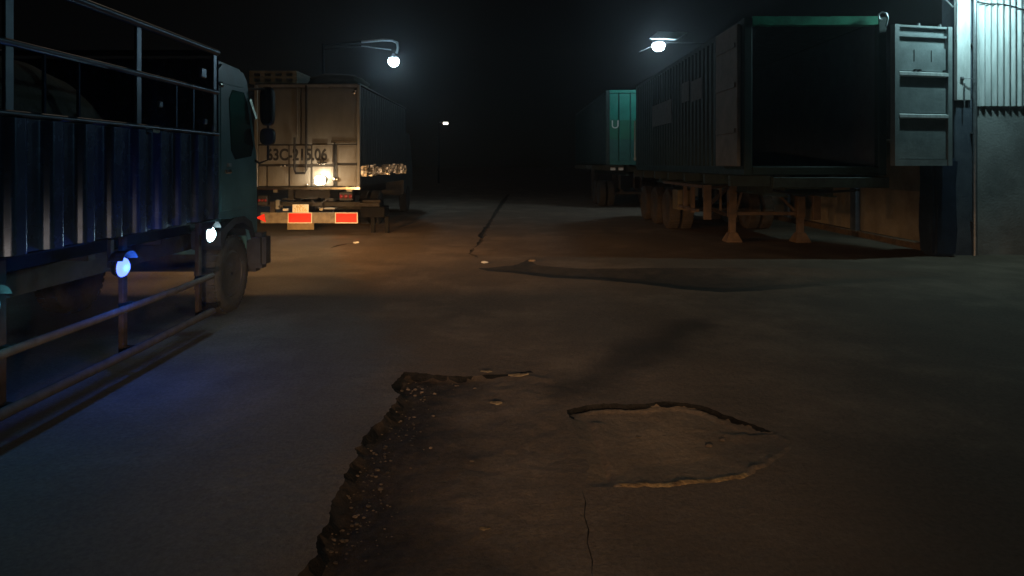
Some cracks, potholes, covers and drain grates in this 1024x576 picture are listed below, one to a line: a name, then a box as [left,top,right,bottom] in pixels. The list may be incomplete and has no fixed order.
crack [469,194,510,257]
pothole [298,366,580,576]
crack [582,491,593,576]
pothole [567,401,792,488]
